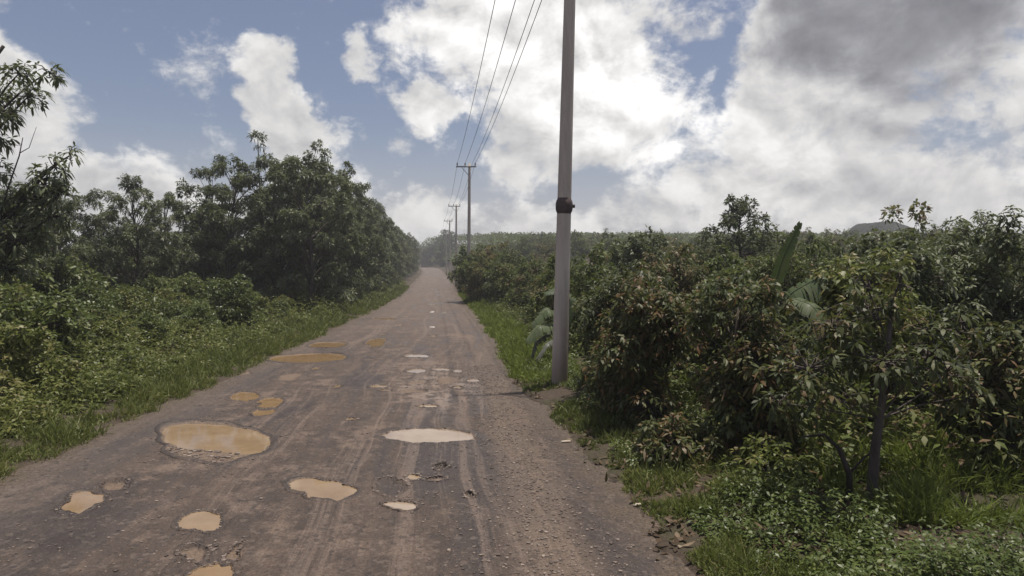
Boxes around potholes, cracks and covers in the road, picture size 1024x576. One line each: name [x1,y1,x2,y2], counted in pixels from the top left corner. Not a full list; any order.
pothole [155,419,278,466]
pothole [249,408,279,417]
pothole [53,488,110,516]
pothole [91,477,132,495]
pothole [266,352,351,363]
pothole [170,508,228,535]
pothole [280,474,369,503]
pothole [379,499,422,512]
pothole [224,390,264,402]
pothole [370,426,489,445]
pothole [183,559,241,576]
pothole [253,396,288,411]
